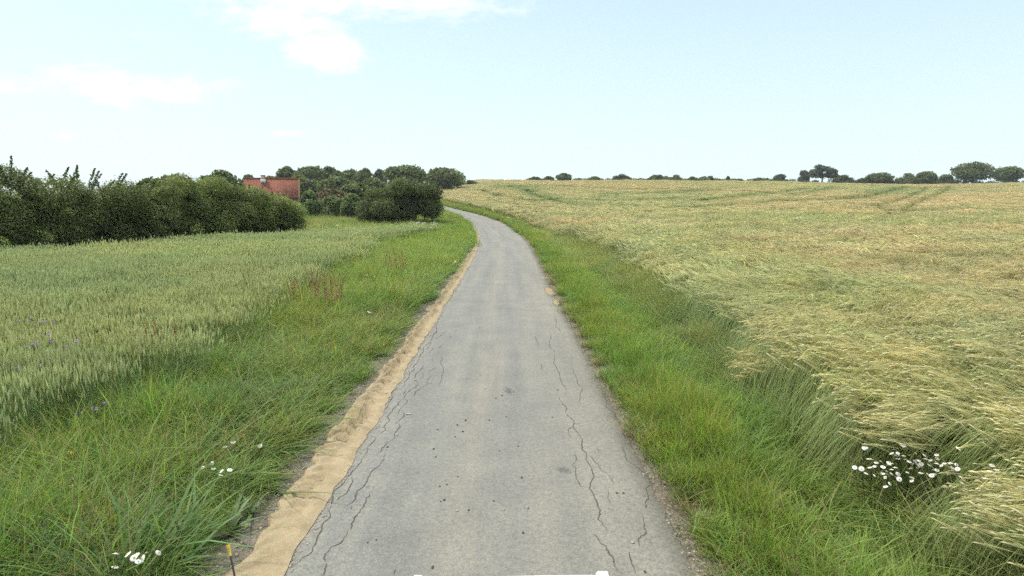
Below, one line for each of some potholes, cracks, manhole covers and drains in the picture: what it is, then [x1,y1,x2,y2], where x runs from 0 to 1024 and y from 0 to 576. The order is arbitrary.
crack [285,318,444,576]
crack [535,320,685,574]
